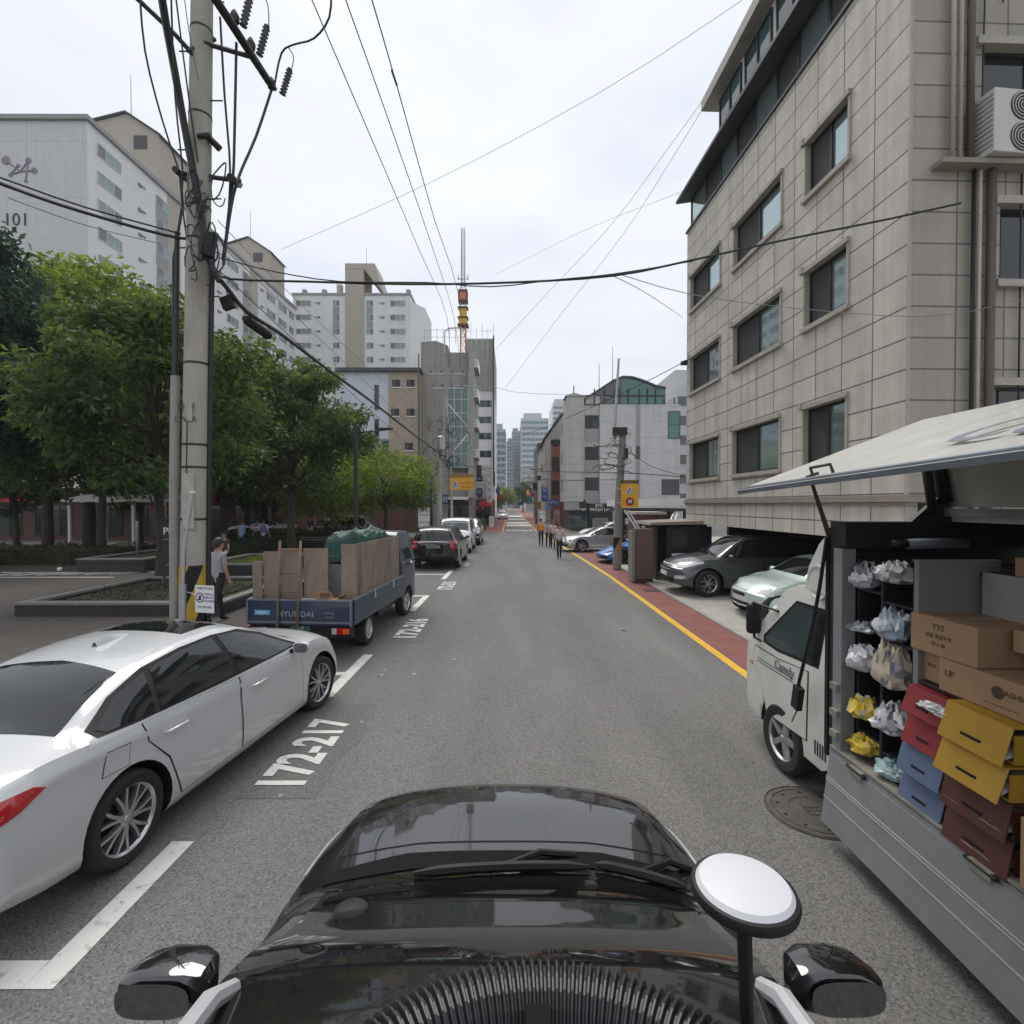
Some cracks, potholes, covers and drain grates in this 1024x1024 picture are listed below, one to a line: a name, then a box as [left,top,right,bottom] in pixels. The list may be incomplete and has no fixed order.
manhole cover [764,786,841,841]
